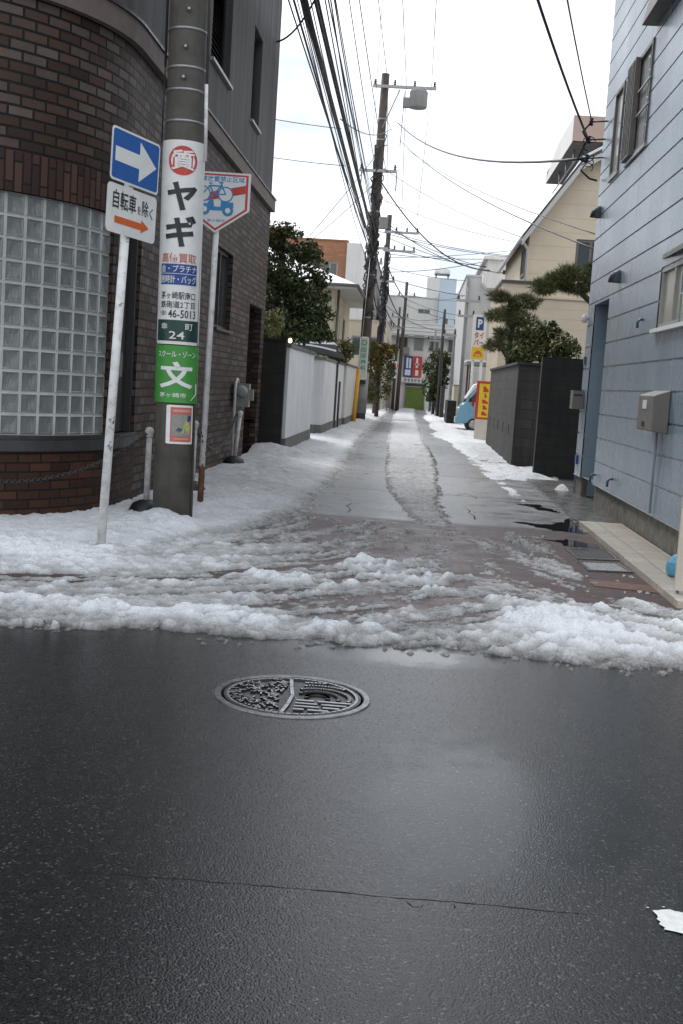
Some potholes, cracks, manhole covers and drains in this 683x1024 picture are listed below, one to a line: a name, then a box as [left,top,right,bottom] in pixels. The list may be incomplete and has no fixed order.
manhole cover [214,675,371,719]
